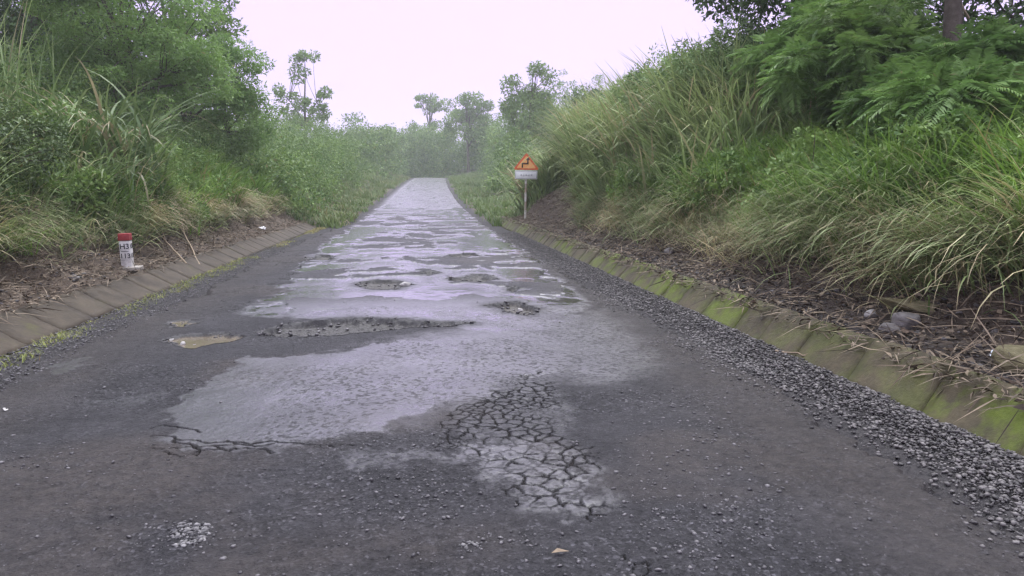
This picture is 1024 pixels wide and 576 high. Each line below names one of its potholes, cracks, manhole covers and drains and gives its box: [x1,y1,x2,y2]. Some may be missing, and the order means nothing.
pothole [159,331,246,349]
pothole [254,316,476,338]
pothole [483,301,540,316]
crack [435,383,600,522]
pothole [449,273,498,282]
crack [152,426,350,457]
pothole [164,318,201,328]
pothole [355,279,415,290]
